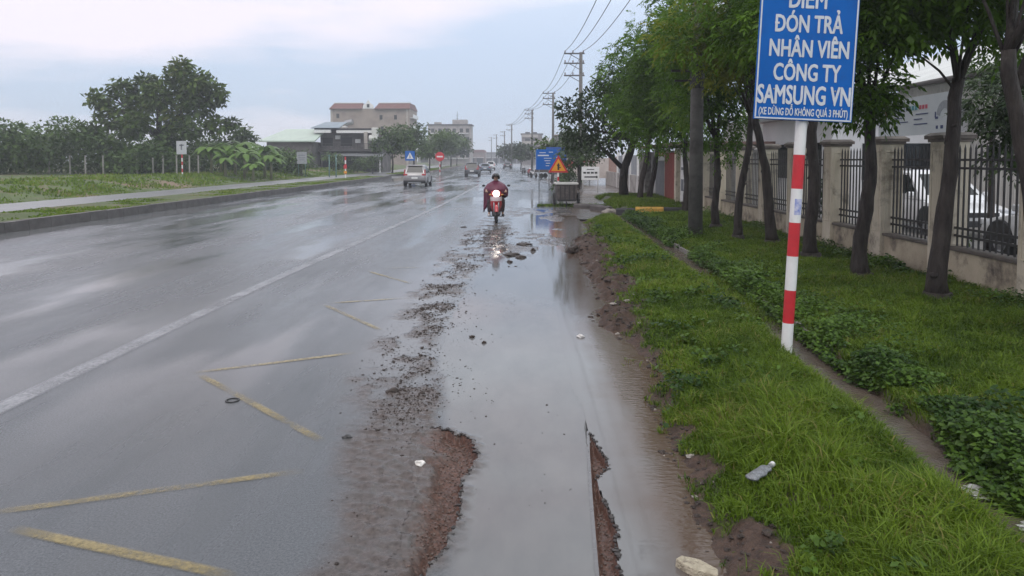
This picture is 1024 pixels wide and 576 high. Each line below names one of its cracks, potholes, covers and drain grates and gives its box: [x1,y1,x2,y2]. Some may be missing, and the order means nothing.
pothole [586,431,624,576]
pothole [383,426,481,576]
